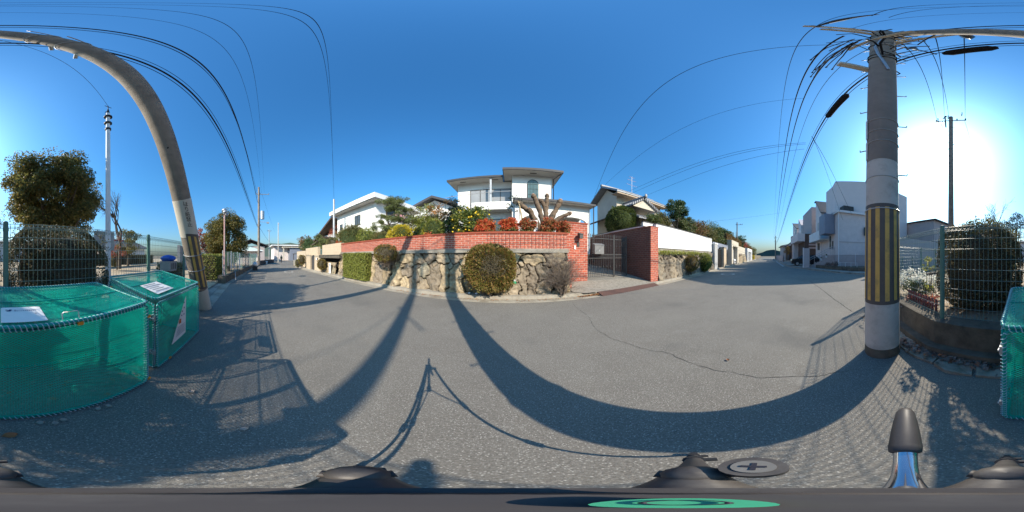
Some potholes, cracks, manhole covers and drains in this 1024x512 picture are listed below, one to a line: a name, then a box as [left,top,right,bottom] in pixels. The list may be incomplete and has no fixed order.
crack [573,304,868,378]
